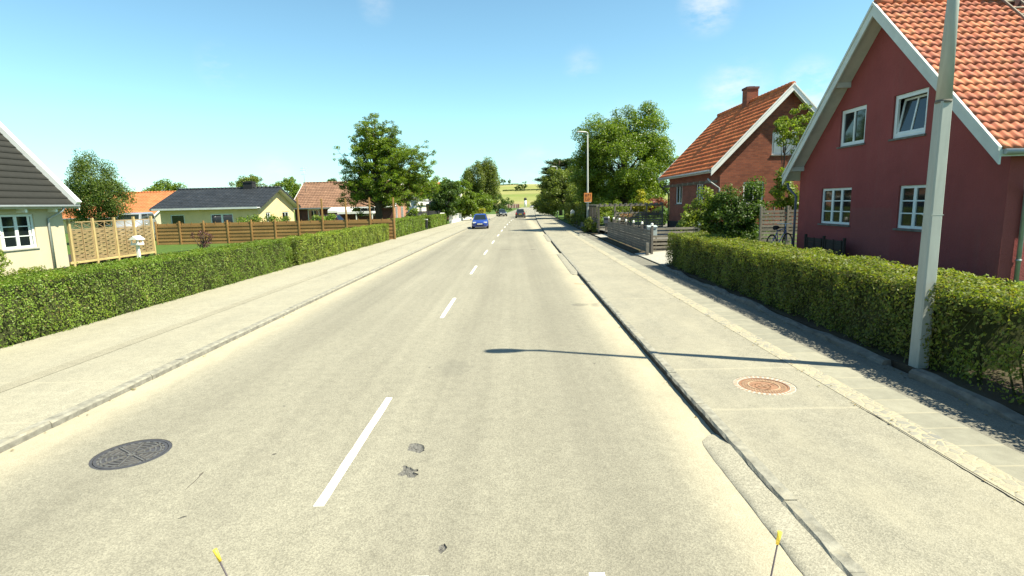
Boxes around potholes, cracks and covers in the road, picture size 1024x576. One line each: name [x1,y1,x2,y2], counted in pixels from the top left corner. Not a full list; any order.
pothole [408,443,424,453]
manhole cover [88,439,172,470]
pothole [398,465,418,478]
manhole cover [733,376,797,395]
